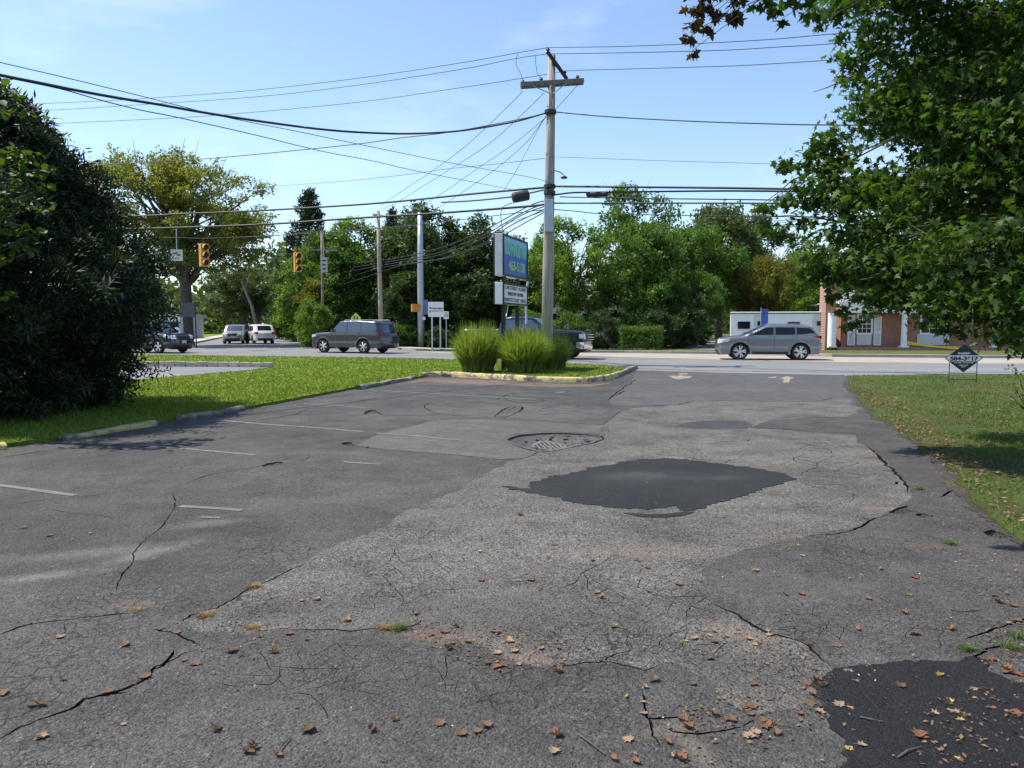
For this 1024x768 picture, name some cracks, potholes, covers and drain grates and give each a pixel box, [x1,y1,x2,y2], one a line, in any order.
crack [217,617,448,719]
crack [0,649,203,739]
crack [768,416,916,536]
crack [642,690,757,746]
crack [116,456,311,591]
crack [324,525,509,609]
